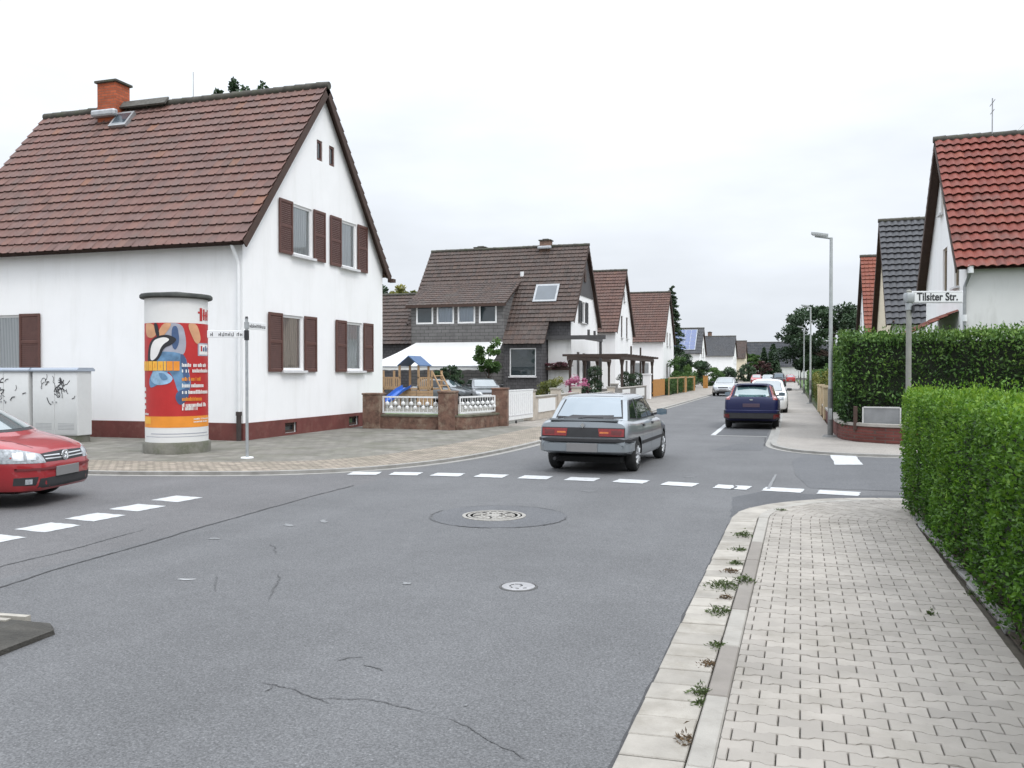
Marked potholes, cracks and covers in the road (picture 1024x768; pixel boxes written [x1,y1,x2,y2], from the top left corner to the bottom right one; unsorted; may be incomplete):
crack [260,681,420,711]
manhole cover [462,510,526,521]
crack [448,717,526,759]
manhole cover [499,581,538,592]
